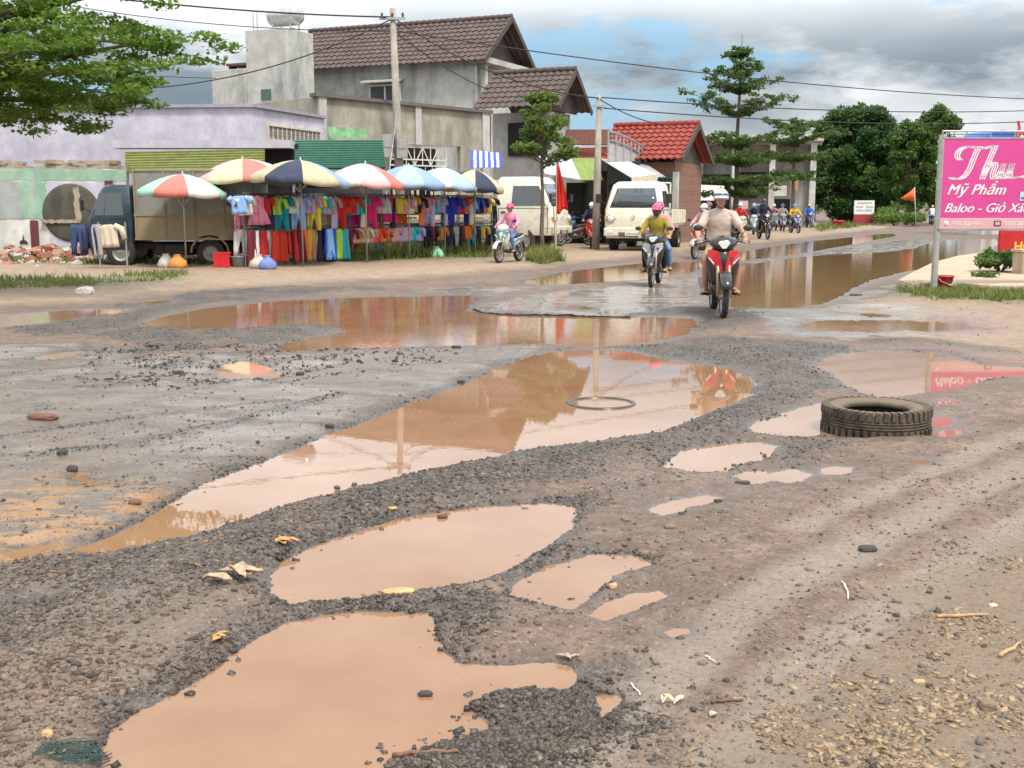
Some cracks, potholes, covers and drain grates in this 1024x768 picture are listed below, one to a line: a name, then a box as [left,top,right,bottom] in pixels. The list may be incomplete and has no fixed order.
pothole [655,438,786,473]
manhole cover [567,396,636,410]
pothole [258,498,586,606]
pothole [805,348,1024,398]
pothole [84,602,592,768]
pothole [500,548,661,610]
pothole [692,239,998,308]
pothole [61,347,766,554]
pothole [130,294,714,352]
